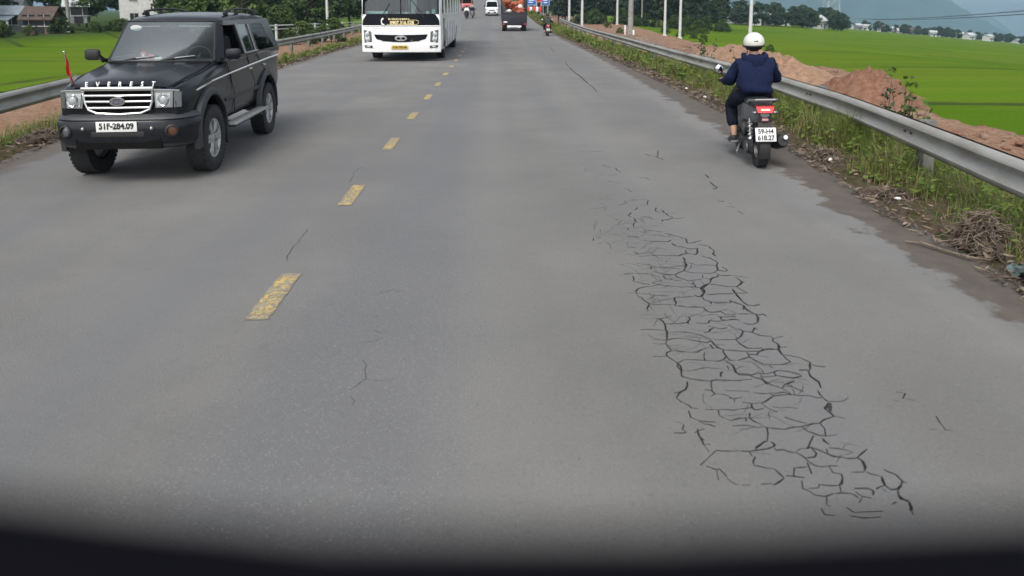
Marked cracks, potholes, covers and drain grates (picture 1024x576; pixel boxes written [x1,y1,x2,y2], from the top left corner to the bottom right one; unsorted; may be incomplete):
crack [585,165,914,518]
